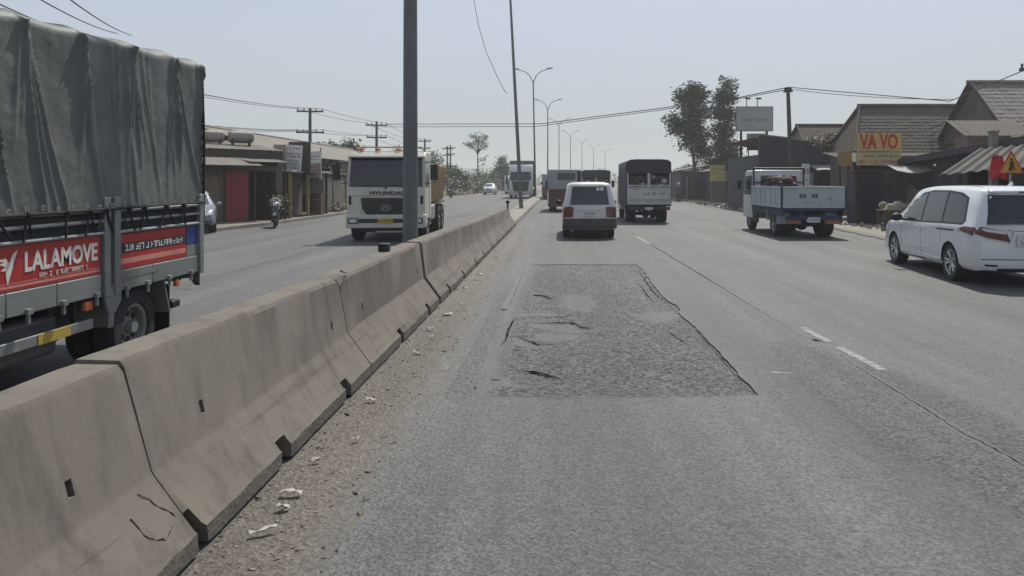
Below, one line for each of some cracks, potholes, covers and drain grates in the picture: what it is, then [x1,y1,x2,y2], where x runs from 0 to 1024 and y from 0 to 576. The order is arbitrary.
crack [670,332,753,394]
crack [636,272,670,306]
crack [500,318,527,346]
